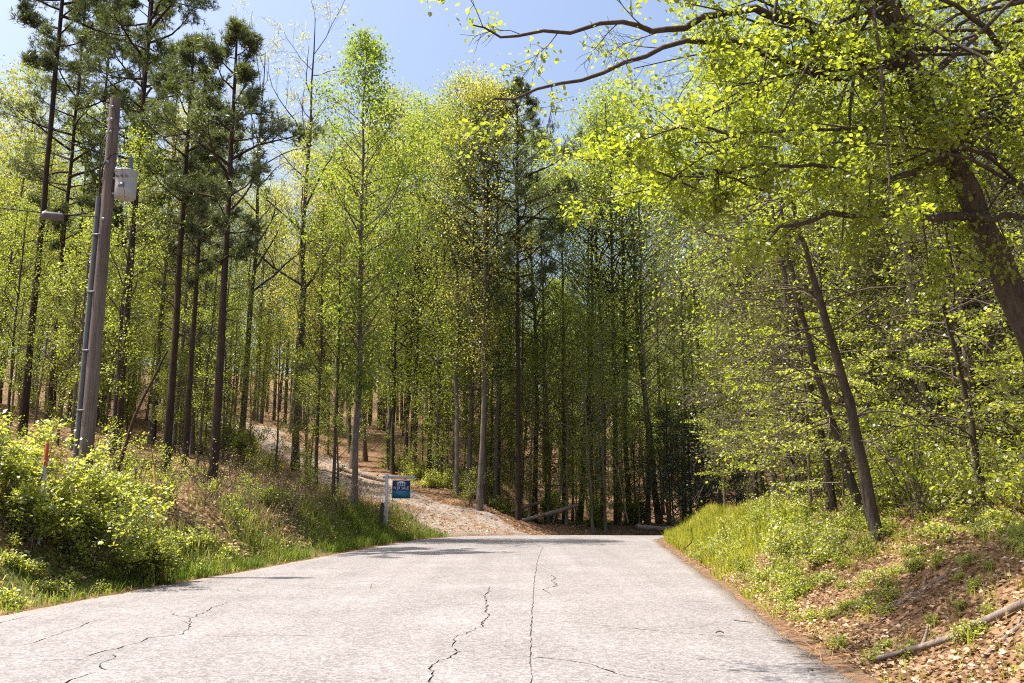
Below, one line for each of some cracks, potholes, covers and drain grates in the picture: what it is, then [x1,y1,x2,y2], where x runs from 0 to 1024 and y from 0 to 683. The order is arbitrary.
crack [529,548,669,683]
crack [42,590,242,683]
crack [428,588,491,683]
